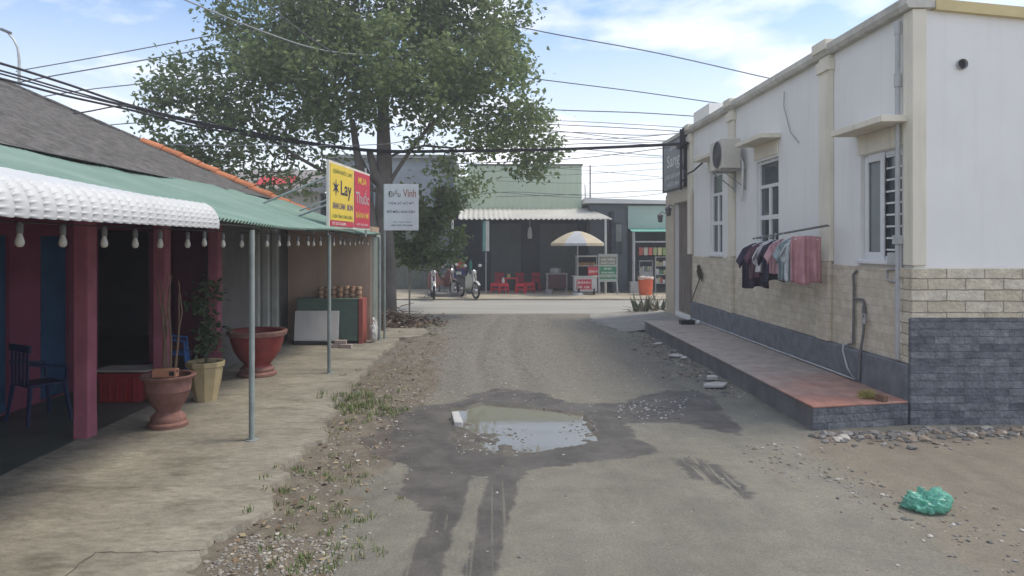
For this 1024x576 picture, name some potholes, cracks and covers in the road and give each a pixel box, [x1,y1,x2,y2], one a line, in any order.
pothole [446,402,603,457]
crack [65,549,223,576]
